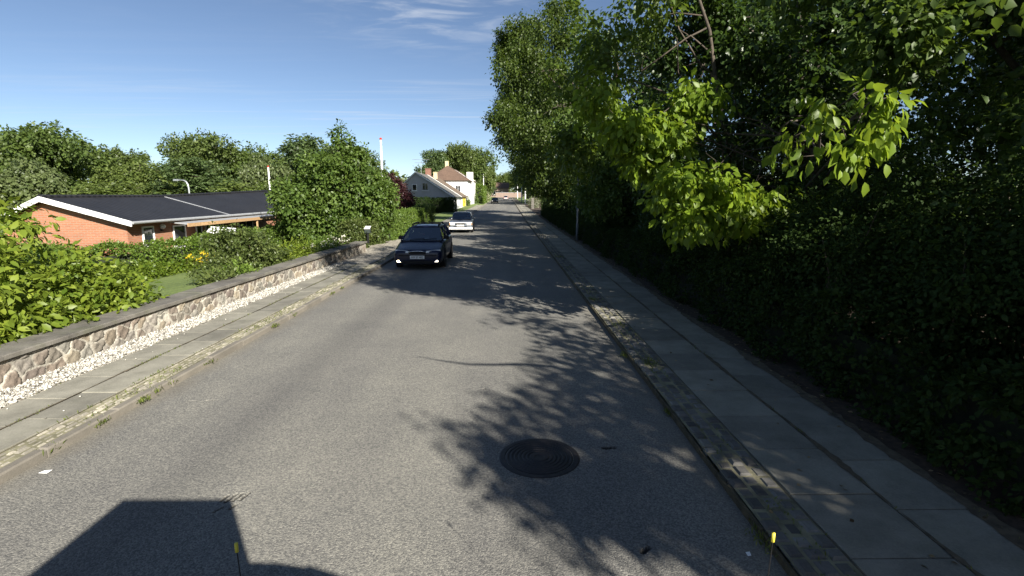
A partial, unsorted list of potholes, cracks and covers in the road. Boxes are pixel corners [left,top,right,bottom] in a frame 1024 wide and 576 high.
manhole cover [499,438,580,478]
